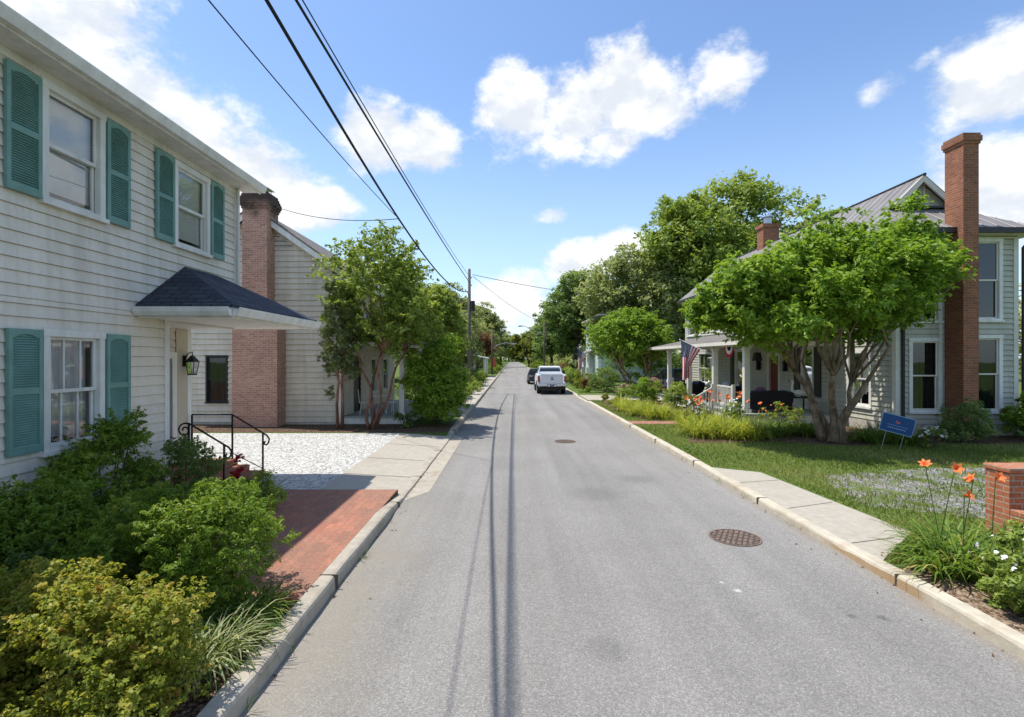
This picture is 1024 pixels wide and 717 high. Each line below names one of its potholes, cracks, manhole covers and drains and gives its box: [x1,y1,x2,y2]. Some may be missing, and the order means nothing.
manhole cover [709,529,763,547]
